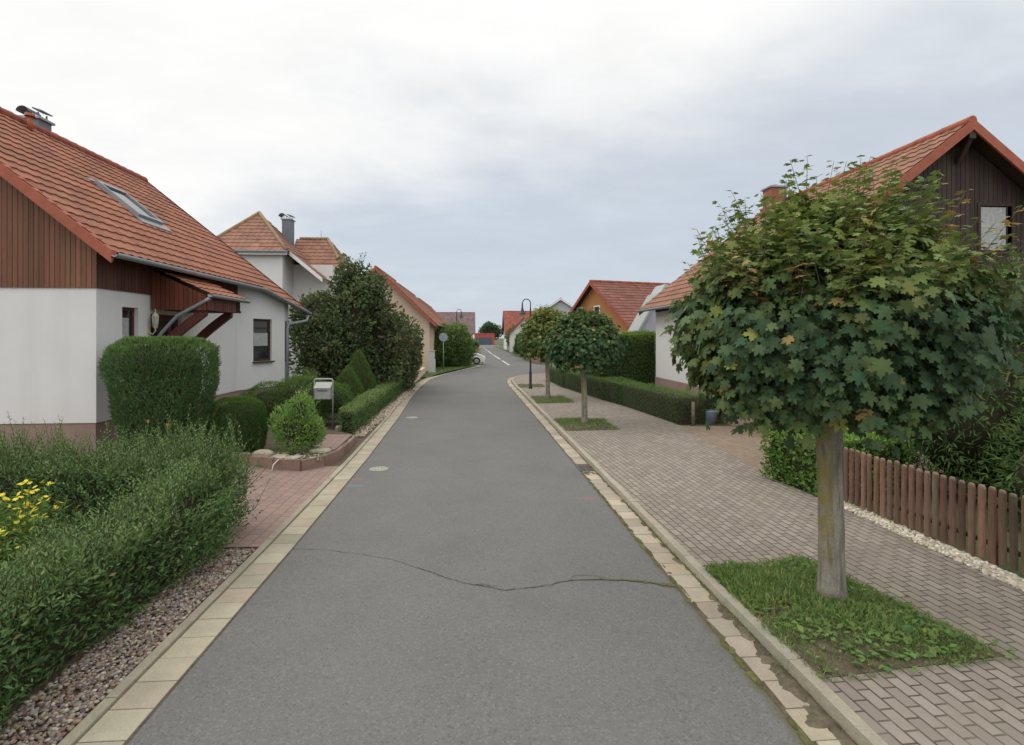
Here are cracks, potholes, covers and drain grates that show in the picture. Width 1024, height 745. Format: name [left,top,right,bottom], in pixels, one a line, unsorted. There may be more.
crack [308,549,677,590]
